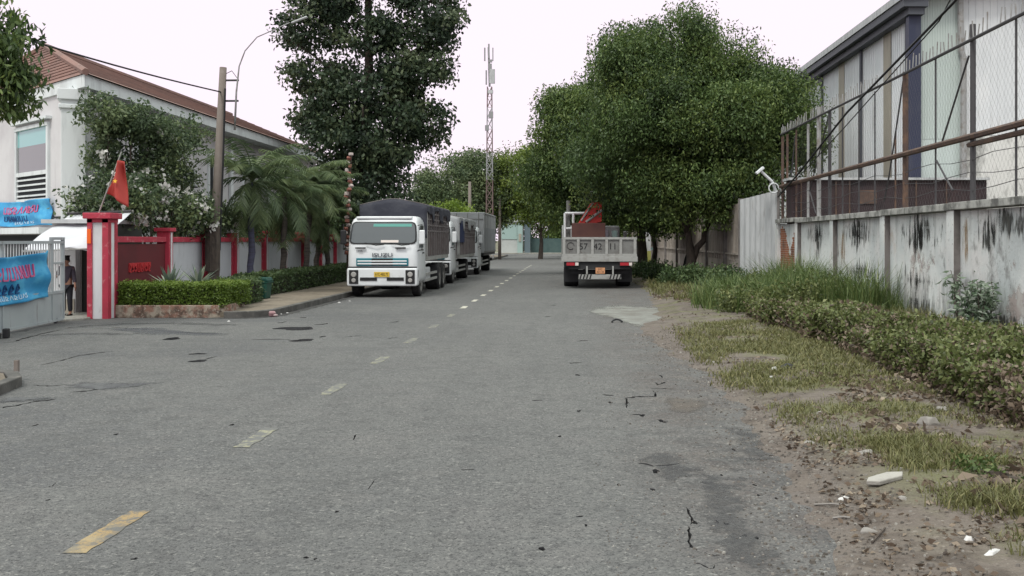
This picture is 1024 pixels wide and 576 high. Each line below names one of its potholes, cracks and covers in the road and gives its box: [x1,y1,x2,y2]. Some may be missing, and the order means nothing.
crack [3,384,98,408]
crack [603,375,668,423]
crack [686,507,719,569]
